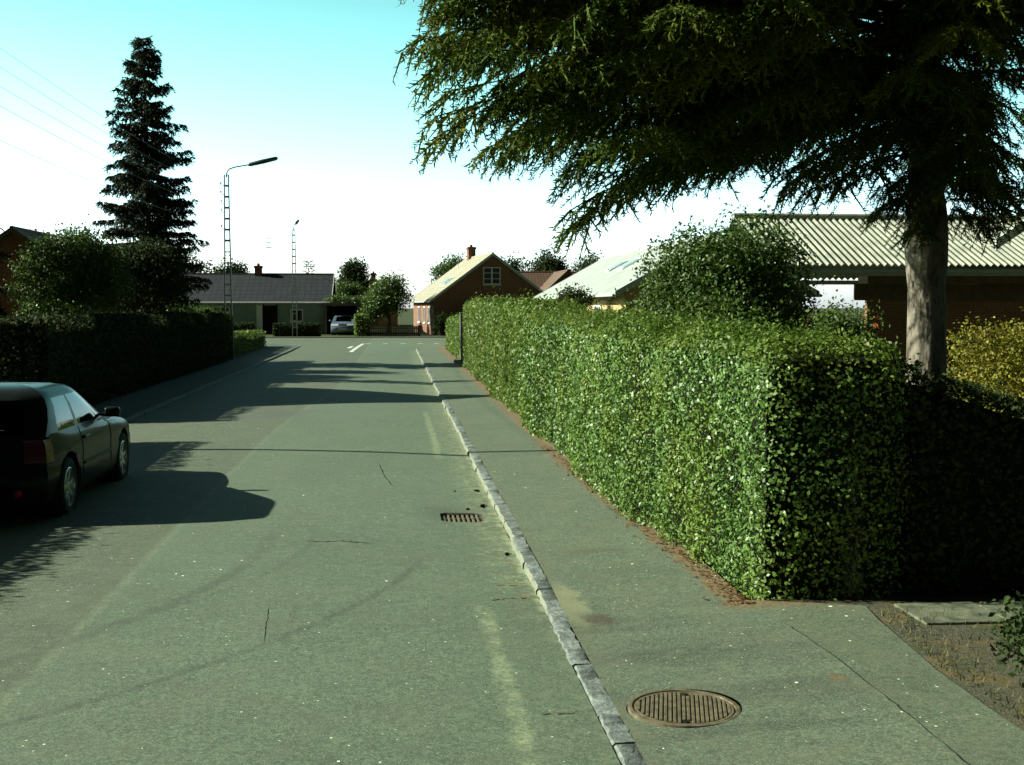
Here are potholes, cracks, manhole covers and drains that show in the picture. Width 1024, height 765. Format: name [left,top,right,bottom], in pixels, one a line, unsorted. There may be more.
drain grate [440,513,484,522]
manhole cover [628,689,741,728]
